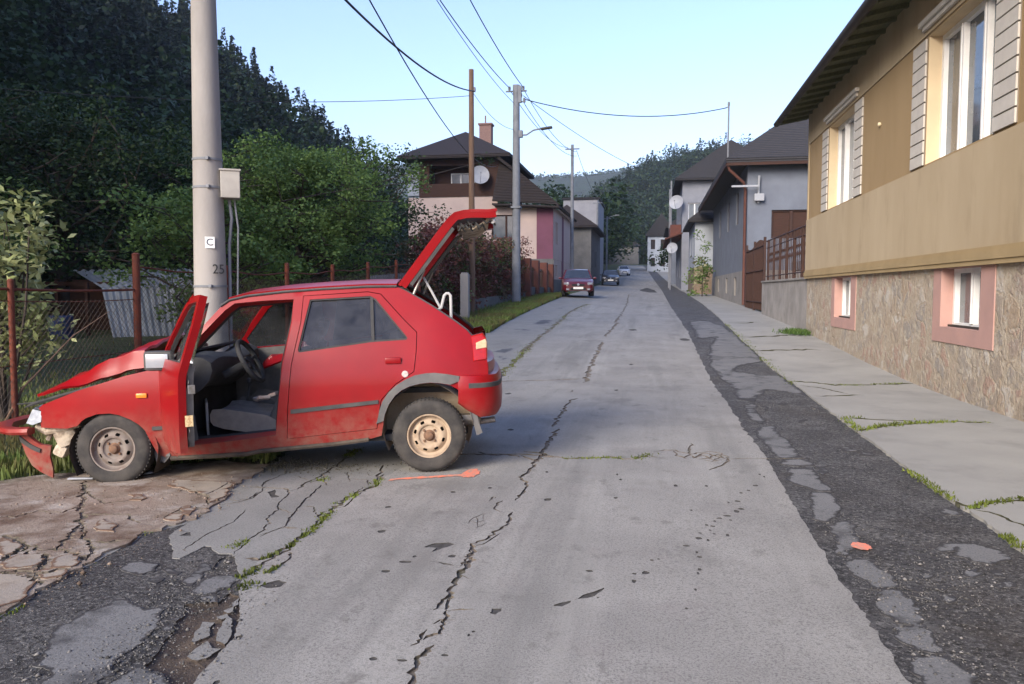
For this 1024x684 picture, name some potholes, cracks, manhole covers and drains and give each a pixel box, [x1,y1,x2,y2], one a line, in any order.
crack [0,449,385,585]
pothole [211,556,235,571]
pothole [145,593,240,684]
crack [407,295,629,684]
crack [660,443,730,470]
